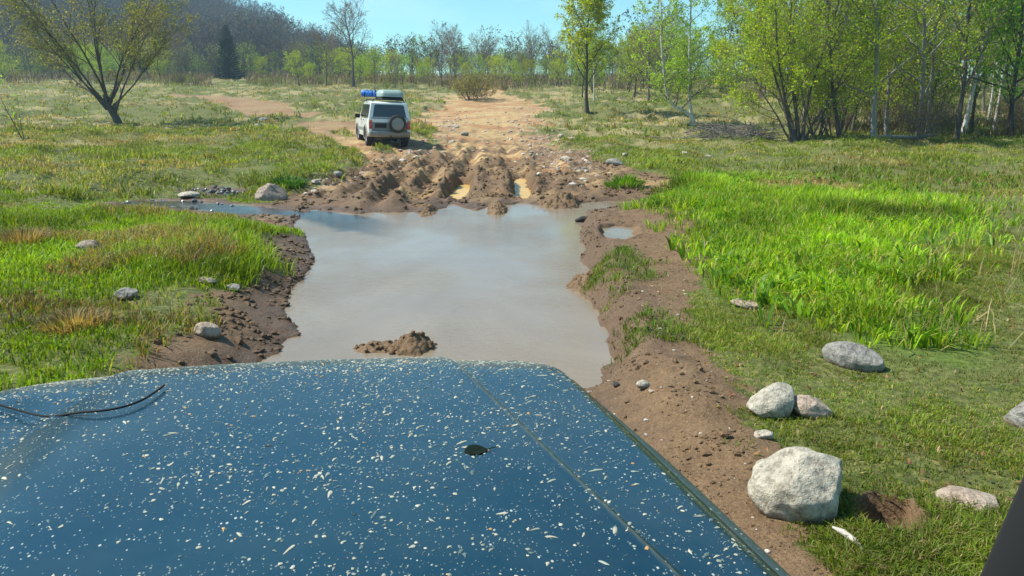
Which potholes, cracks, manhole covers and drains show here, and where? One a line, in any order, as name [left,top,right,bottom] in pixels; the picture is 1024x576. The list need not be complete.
pothole [593,223,644,240]
pothole [435,172,479,202]
pothole [504,168,542,200]
